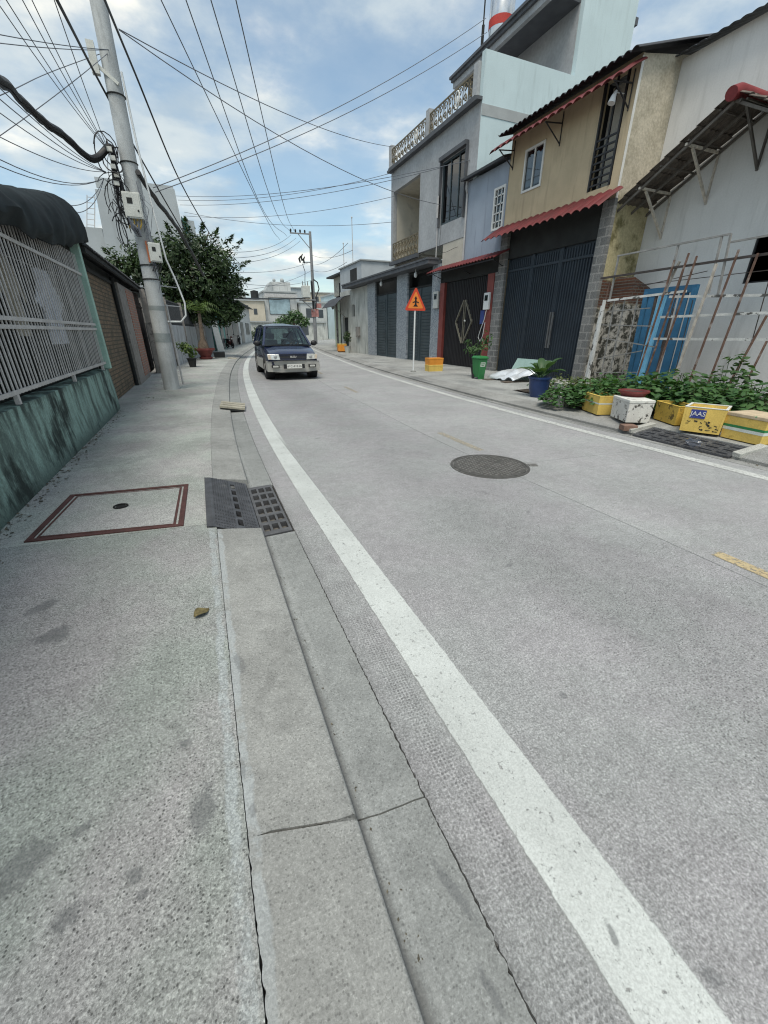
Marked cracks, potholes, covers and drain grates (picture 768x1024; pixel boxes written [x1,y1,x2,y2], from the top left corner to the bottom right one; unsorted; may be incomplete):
drain grate [204,477,293,537]
drain grate [676,437,747,459]
manhole cover [450,454,538,479]
manhole cover [24,484,189,543]
